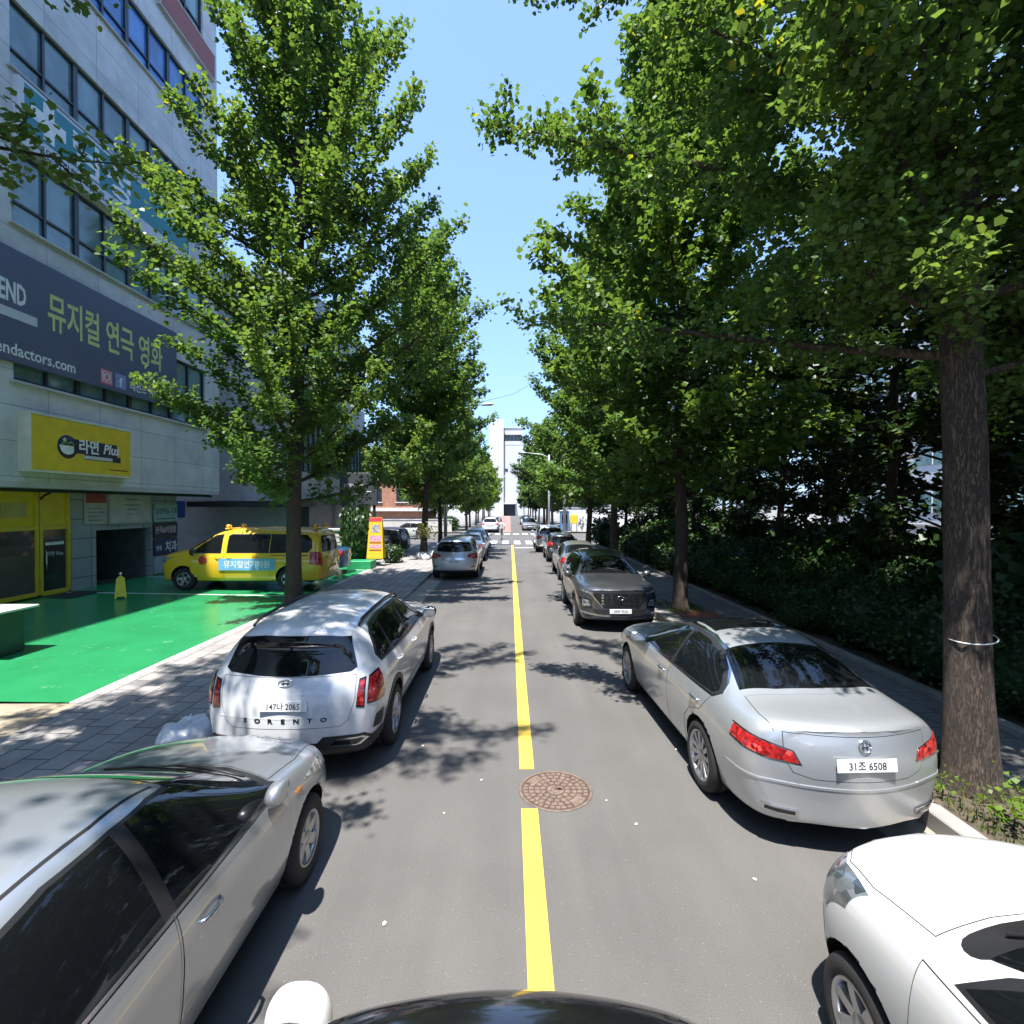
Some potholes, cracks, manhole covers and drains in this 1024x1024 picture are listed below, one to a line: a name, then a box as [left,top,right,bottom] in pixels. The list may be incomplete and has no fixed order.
manhole cover [519,771,593,812]
